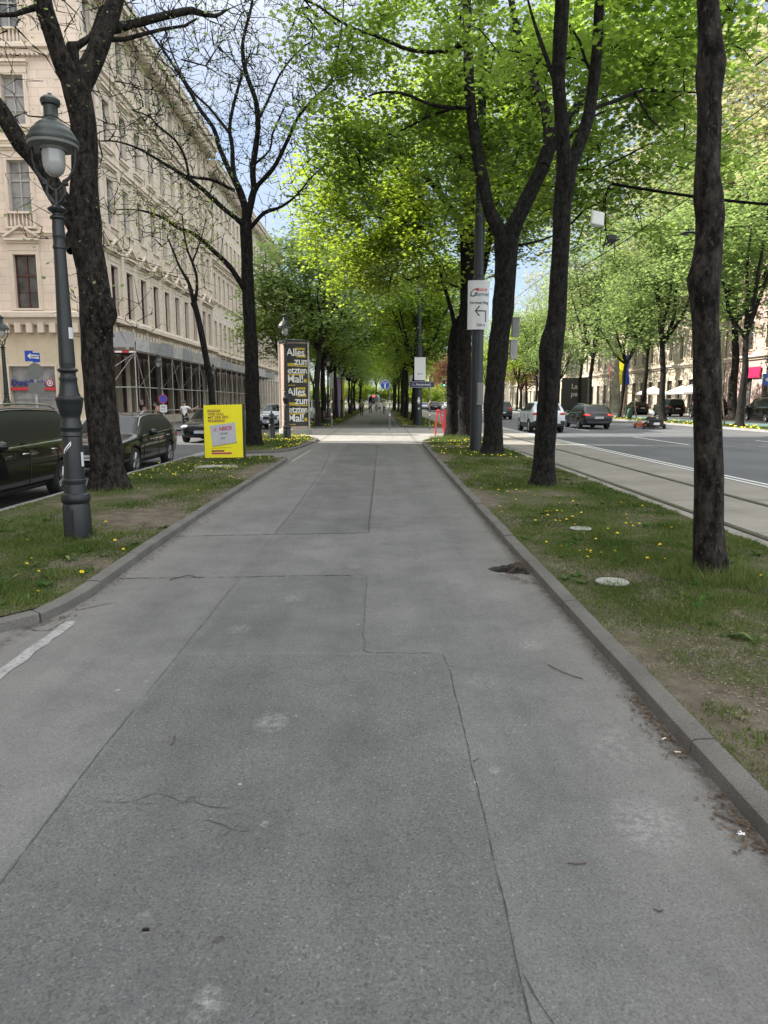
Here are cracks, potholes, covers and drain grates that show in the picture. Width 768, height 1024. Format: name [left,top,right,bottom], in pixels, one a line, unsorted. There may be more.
manhole cover [594,577,631,588]
pothole [488,562,531,575]
crack [104,792,257,835]
